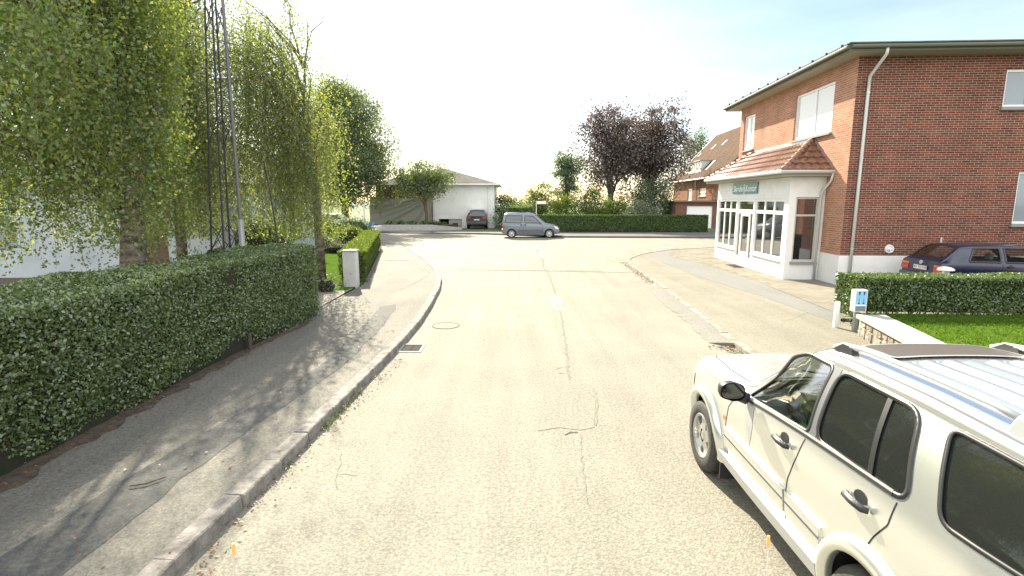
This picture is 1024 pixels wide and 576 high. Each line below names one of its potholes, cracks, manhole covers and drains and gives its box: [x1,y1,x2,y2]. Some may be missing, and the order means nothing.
crack [565,388,599,503]
drain grate [397,344,426,353]
